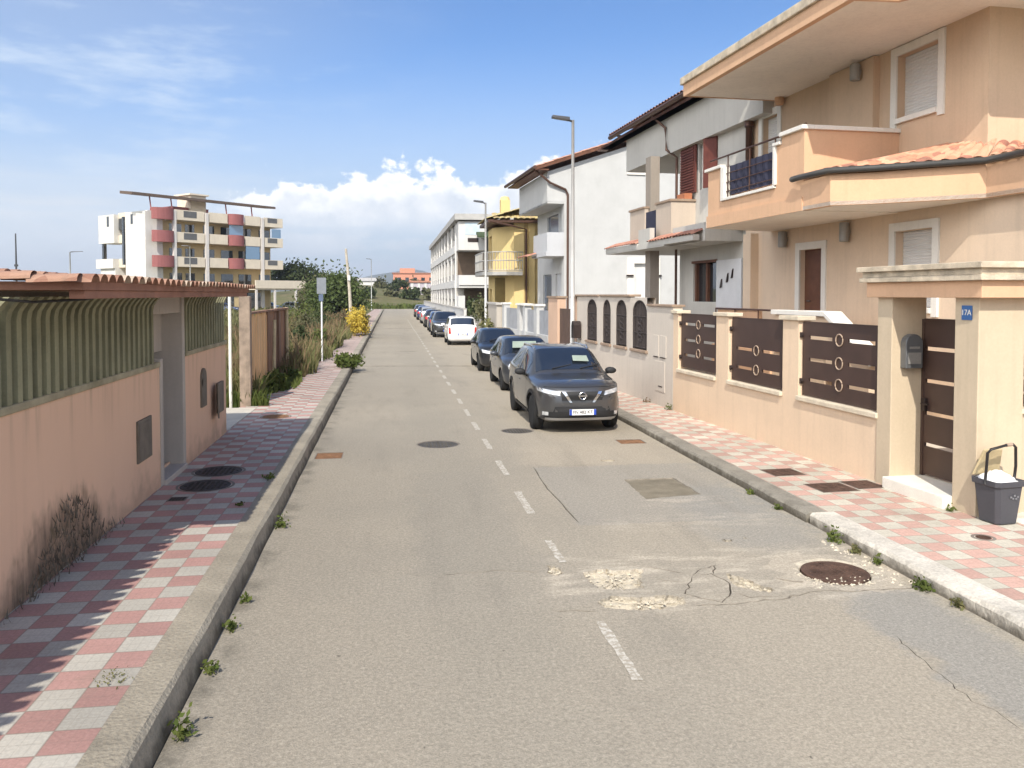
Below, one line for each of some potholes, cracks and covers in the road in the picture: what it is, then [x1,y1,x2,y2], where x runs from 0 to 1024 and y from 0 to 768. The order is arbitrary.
manhole cover [416,440,460,448]
manhole cover [760,468,807,477]
manhole cover [803,482,861,493]
manhole cover [793,558,880,587]
pothole [547,565,566,576]
crack [647,565,918,606]
manhole cover [191,466,246,477]
manhole cover [175,479,235,492]
crack [899,639,1020,729]
manhole cover [838,480,883,489]
pothole [597,595,686,610]
pothole [583,569,644,590]
